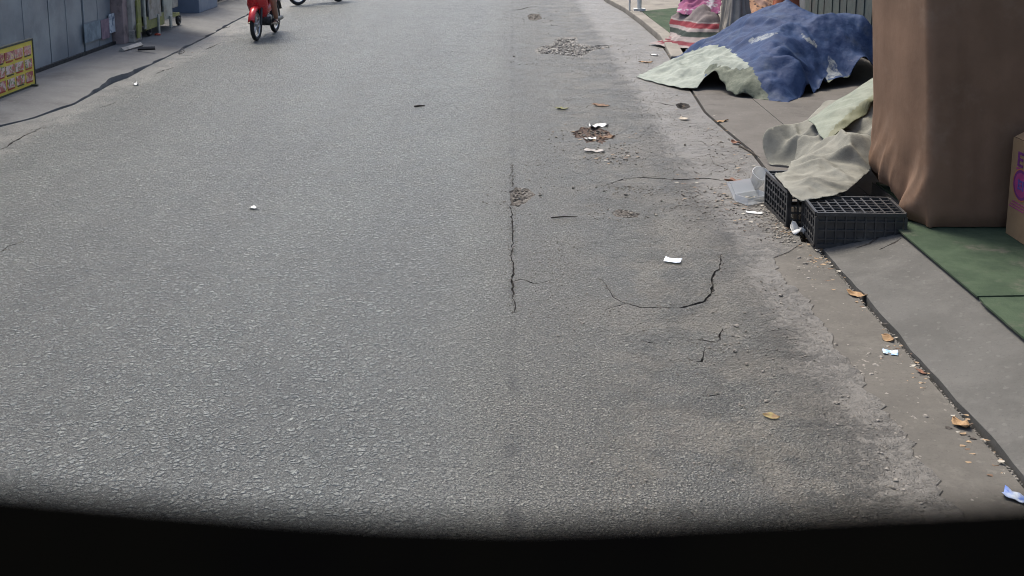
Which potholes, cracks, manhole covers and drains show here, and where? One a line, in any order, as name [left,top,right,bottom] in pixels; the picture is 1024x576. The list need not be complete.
pothole [571,126,613,144]
pothole [509,187,535,207]
pothole [534,37,613,57]
crack [602,255,722,310]
crack [509,166,546,312]
crack [607,177,725,185]
pothole [612,209,640,218]
crack [690,329,723,362]
